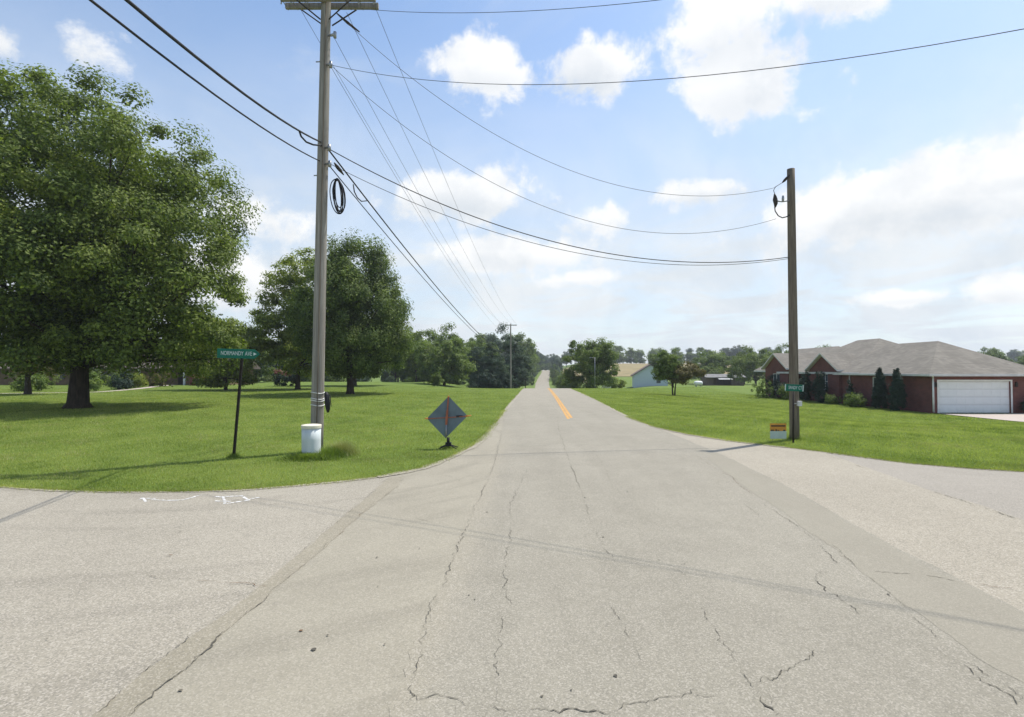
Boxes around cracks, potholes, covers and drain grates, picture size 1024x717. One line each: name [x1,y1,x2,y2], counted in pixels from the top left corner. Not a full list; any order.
crack [490,470,718,714]
crack [400,518,469,706]
crack [704,611,814,714]
crack [964,663,1023,703]
